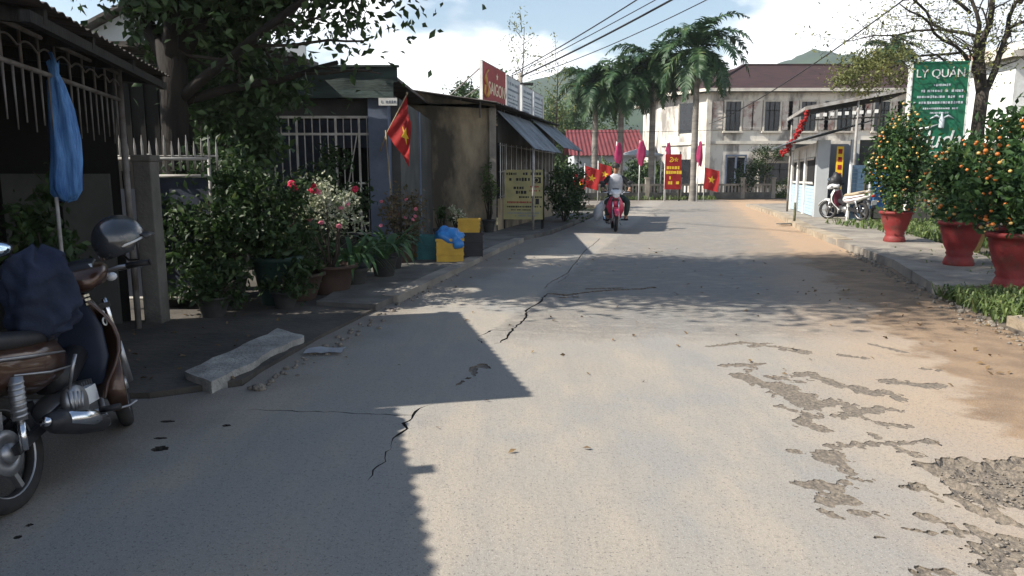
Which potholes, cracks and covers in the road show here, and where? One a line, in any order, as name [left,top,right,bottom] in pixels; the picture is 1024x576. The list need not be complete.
pothole [912,512,1024,576]
crack [478,238,657,343]
crack [266,404,432,480]
